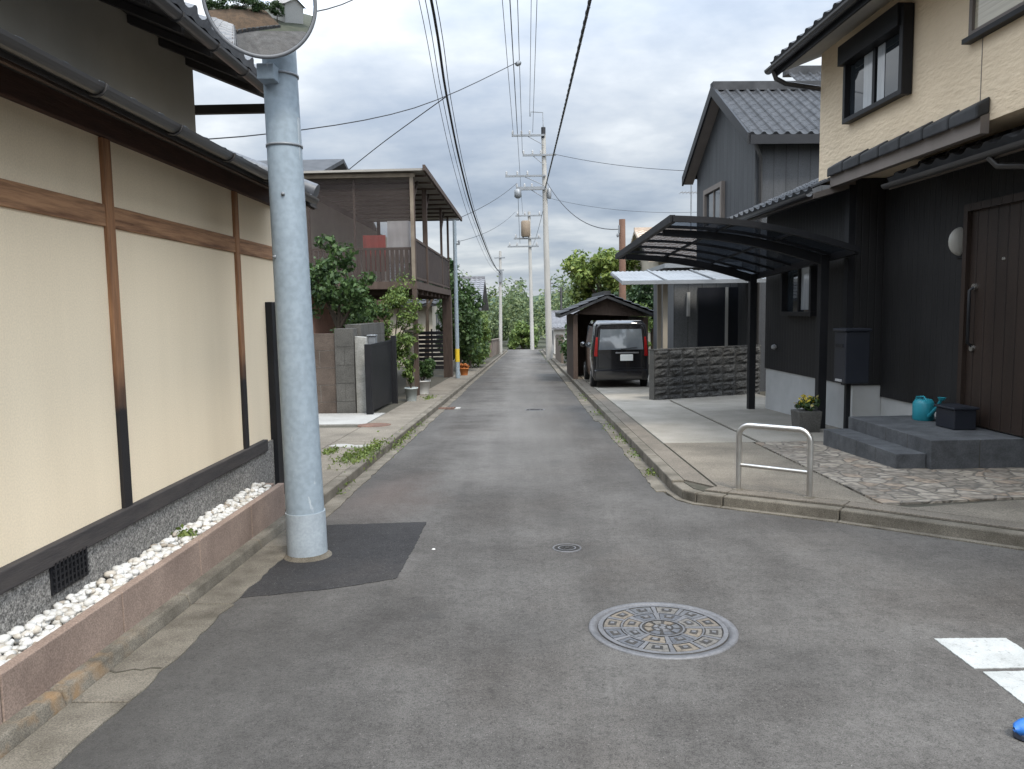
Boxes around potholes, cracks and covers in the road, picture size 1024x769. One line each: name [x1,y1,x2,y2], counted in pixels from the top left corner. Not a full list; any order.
manhole cover [552,544,582,553]
manhole cover [588,602,739,660]
